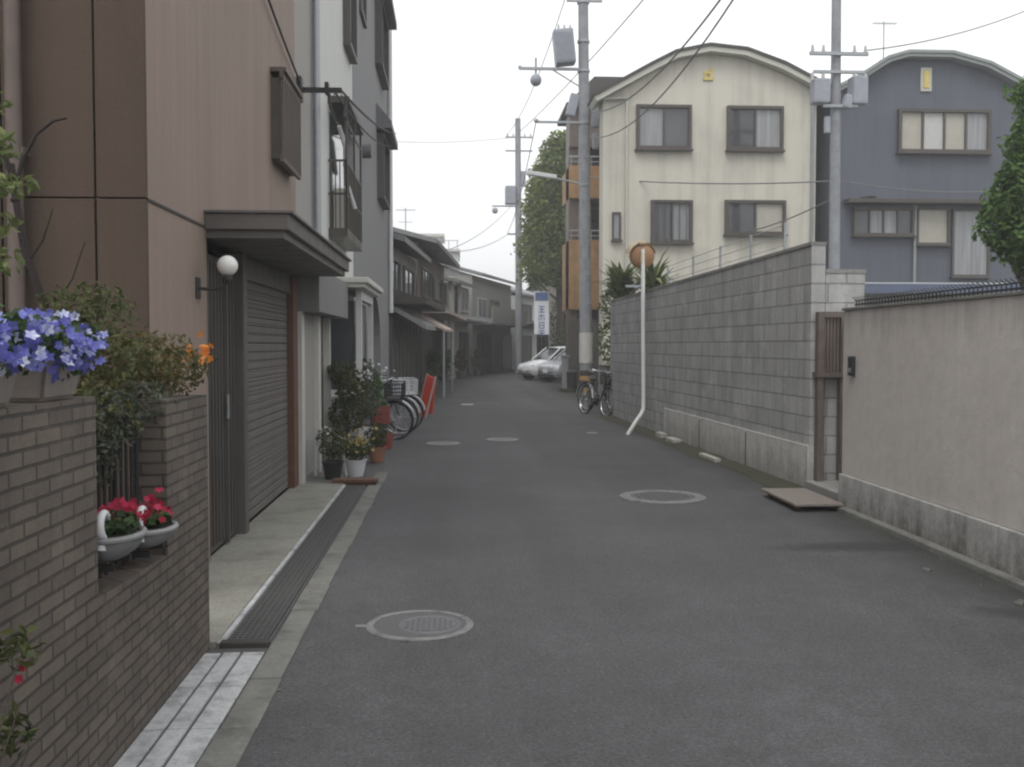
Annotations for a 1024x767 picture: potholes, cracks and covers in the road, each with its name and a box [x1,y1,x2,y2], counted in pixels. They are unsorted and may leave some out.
drain grate [217,484,367,649]
manhole cover [355,610,474,642]
manhole cover [619,490,706,504]
